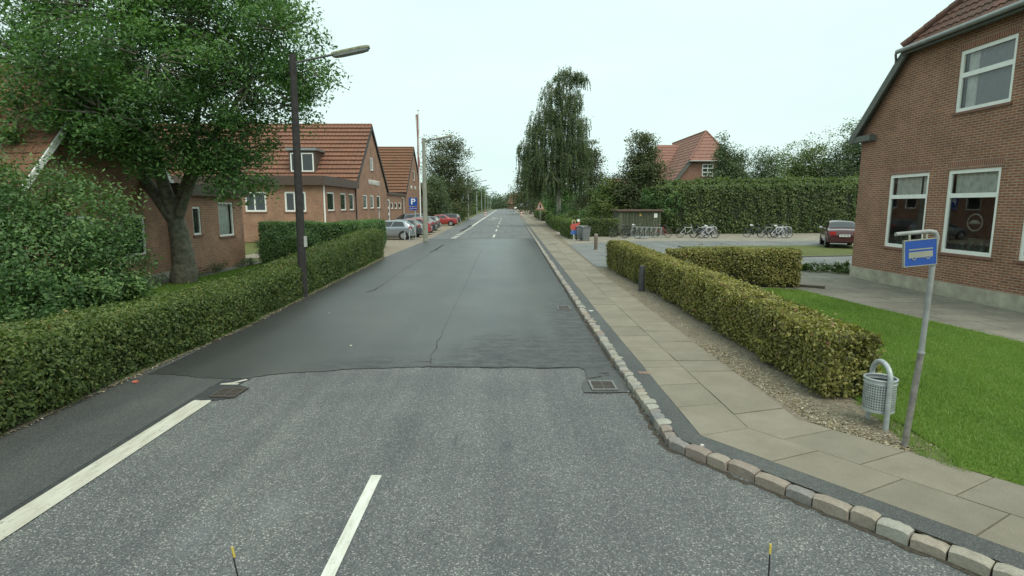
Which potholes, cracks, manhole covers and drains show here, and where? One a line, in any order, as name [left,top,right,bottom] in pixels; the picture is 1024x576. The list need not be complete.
drain grate [588,380,618,390]
crack [419,250,558,368]
